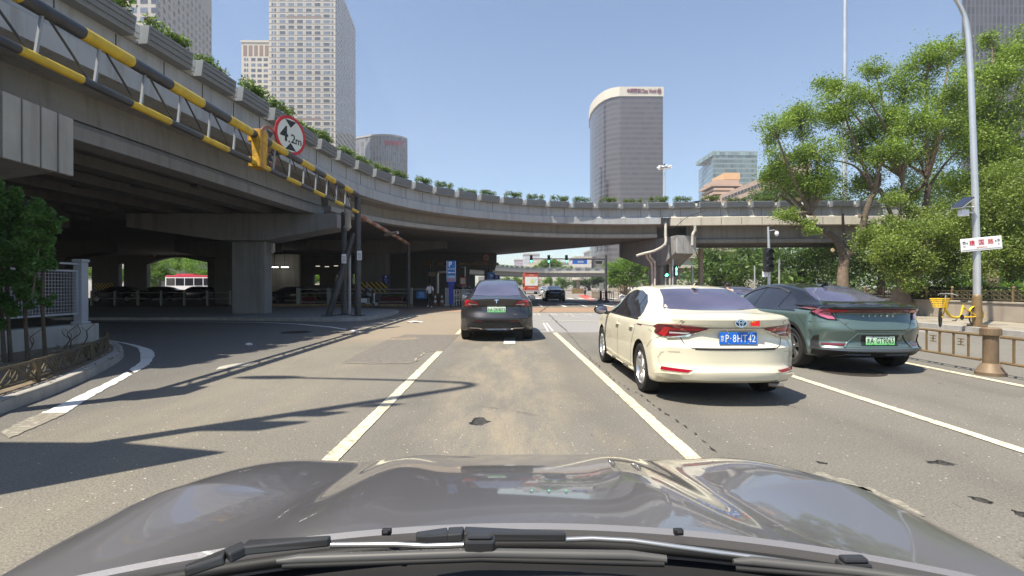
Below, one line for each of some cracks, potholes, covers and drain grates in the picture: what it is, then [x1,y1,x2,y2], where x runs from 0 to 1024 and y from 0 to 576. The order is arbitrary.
pothole [469,417,491,426]
